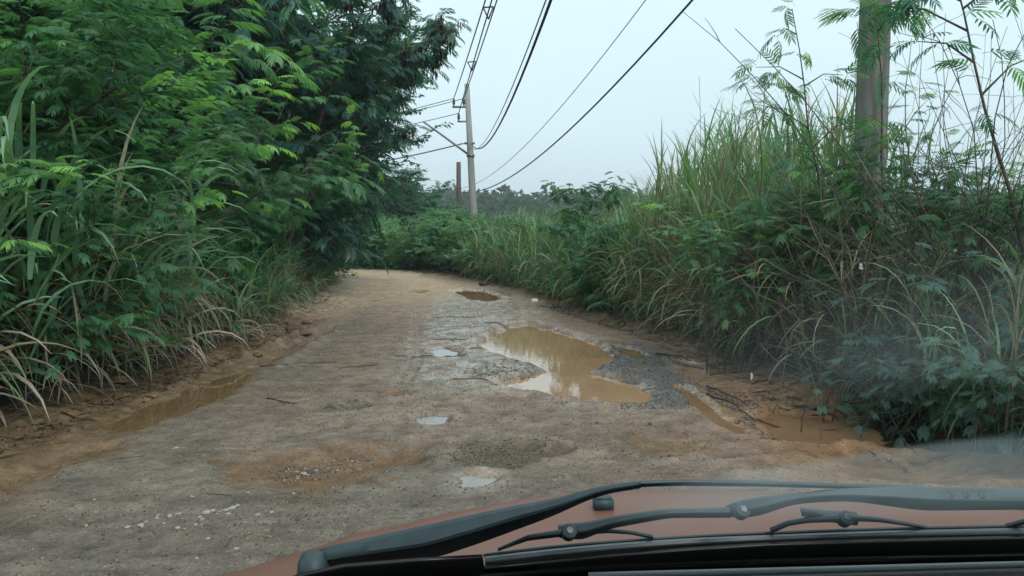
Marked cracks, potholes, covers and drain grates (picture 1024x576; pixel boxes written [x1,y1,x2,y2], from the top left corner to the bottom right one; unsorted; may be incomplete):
pothole [411,409,459,425]
pothole [448,288,514,301]
pothole [193,432,455,495]
pothole [469,320,671,403]
pothole [432,433,581,469]
pothole [426,346,469,357]
pothole [454,466,508,488]
